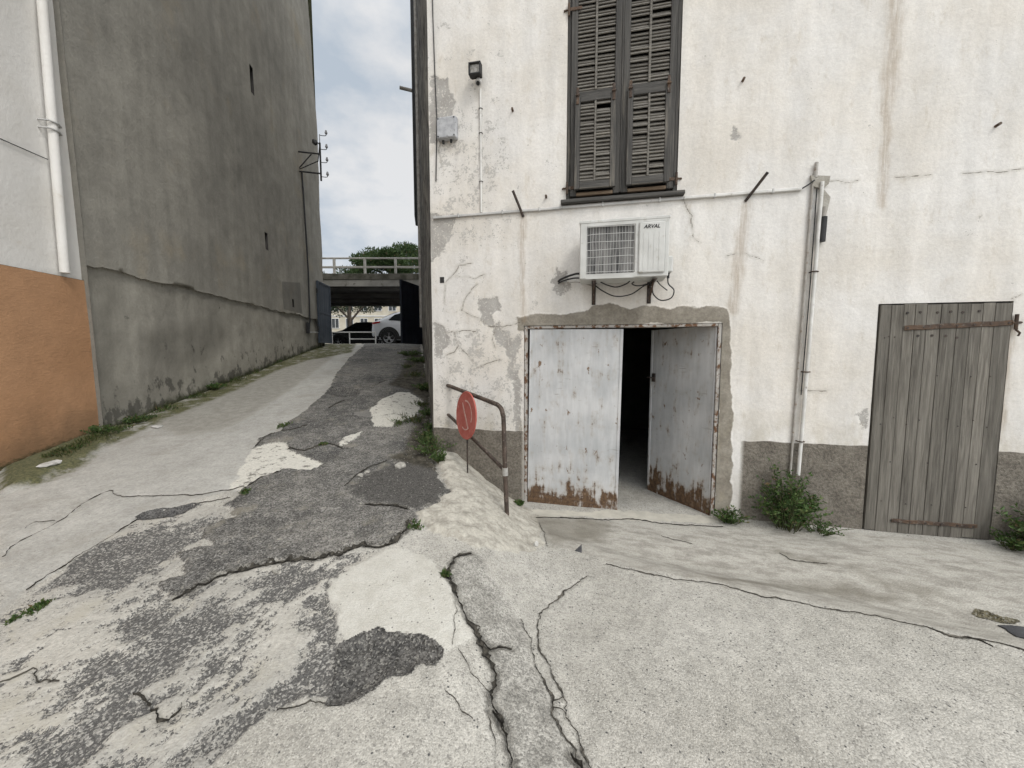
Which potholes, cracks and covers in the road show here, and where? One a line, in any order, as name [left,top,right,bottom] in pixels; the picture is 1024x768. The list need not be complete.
crack [444,552,591,768]
crack [606,563,1024,650]
crack [2,471,278,557]
crack [172,519,411,601]
crack [132,692,182,723]
crack [0,667,59,683]
